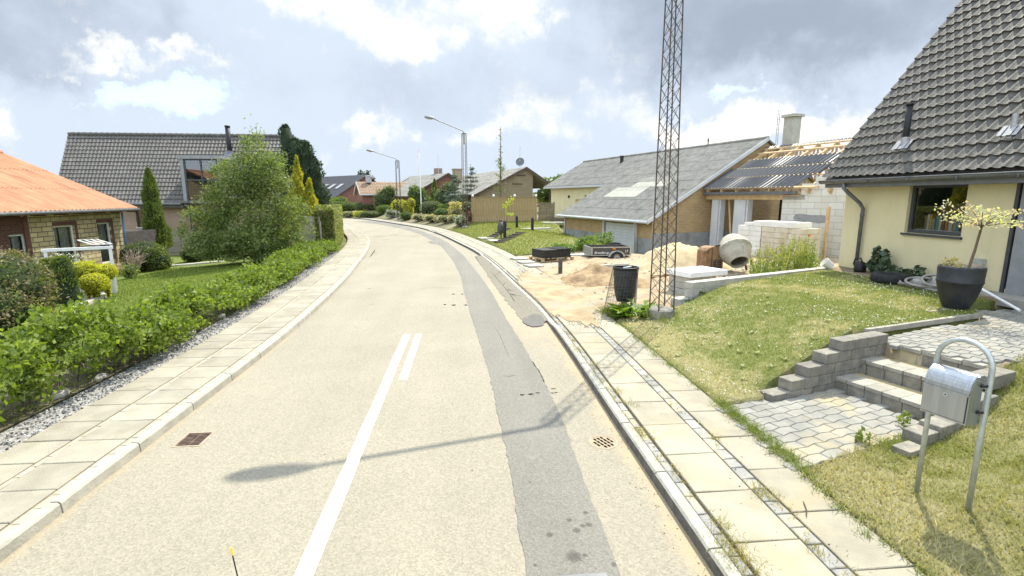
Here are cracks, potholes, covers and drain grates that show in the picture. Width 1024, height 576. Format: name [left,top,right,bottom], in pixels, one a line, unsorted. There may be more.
drain grate [172,431,216,447]
drain grate [589,435,619,449]
